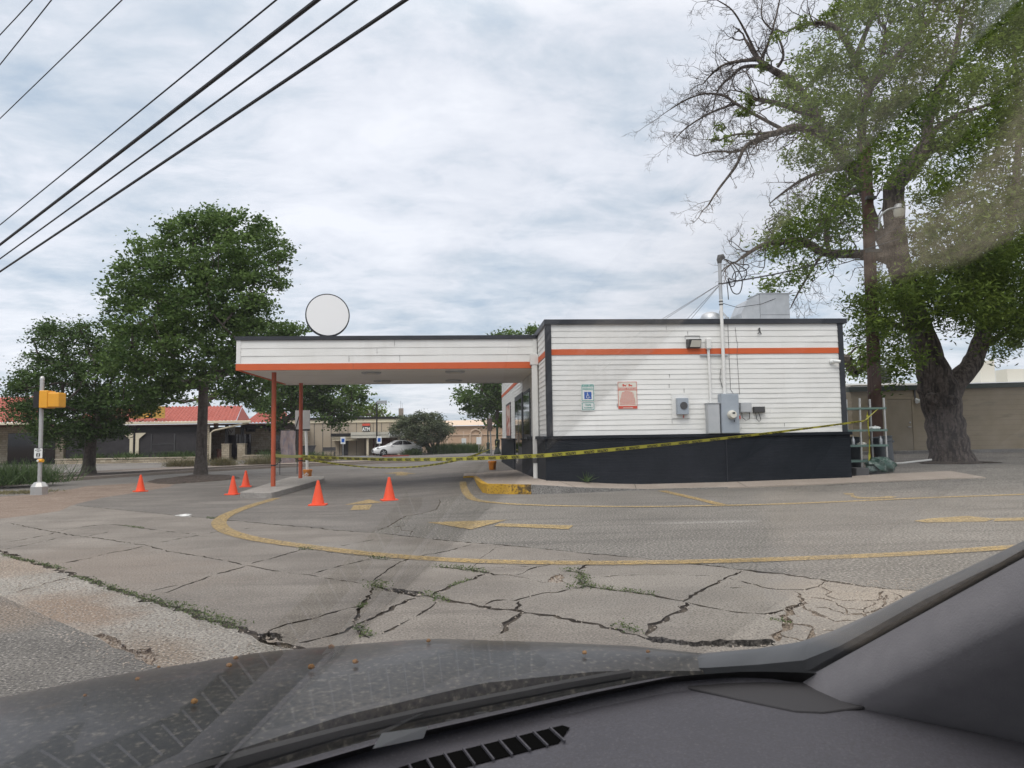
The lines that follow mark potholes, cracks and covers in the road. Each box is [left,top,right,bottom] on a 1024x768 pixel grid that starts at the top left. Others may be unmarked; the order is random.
crack [0,500,915,649]
